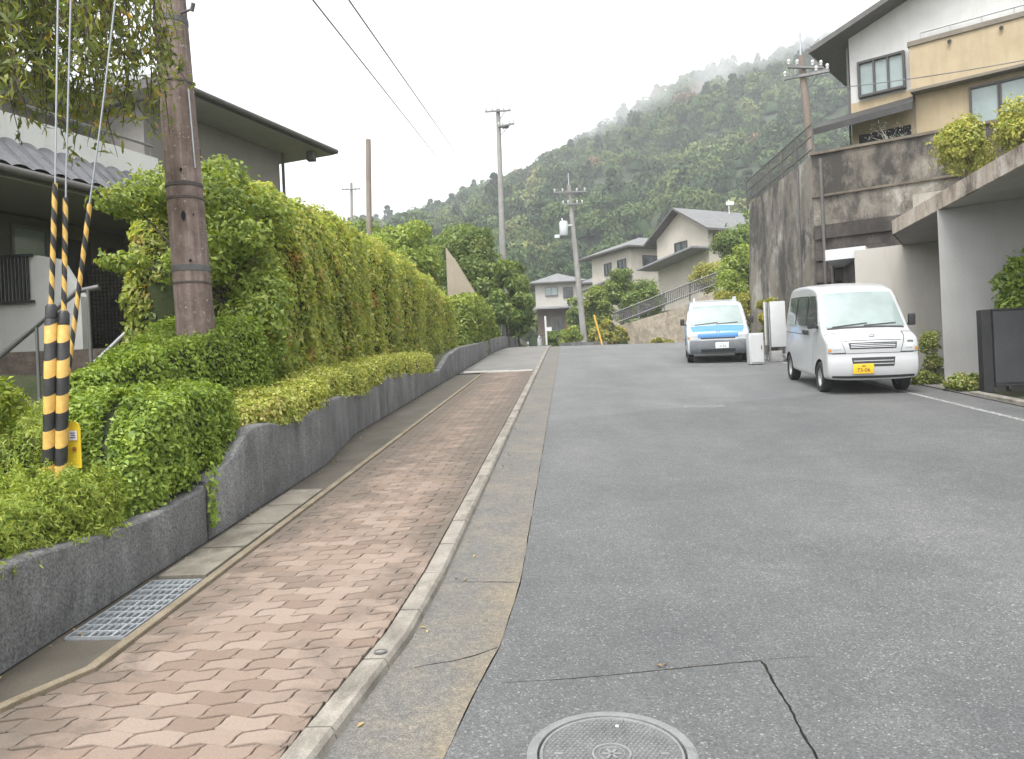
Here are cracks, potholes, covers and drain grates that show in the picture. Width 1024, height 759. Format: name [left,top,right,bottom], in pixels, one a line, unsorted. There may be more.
crack [503,657,819,759]
manhole cover [527,712,699,759]
drain grate [64,579,202,641]
